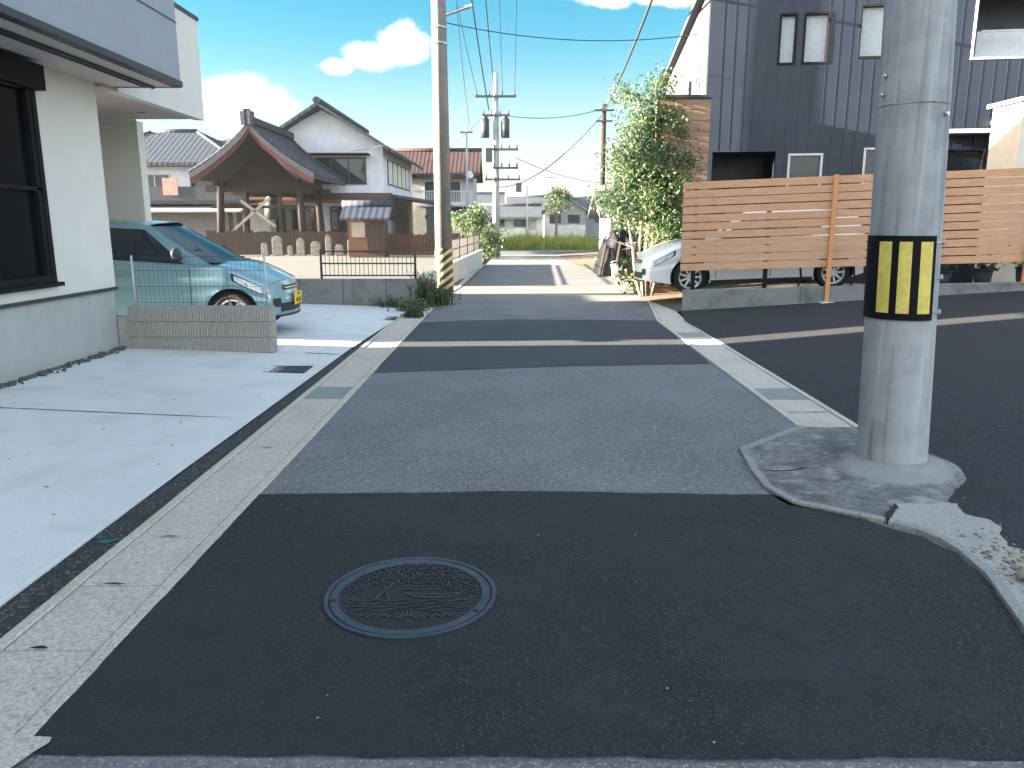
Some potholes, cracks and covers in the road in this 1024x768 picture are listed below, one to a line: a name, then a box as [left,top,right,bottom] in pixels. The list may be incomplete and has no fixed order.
manhole cover [323,557,497,640]
